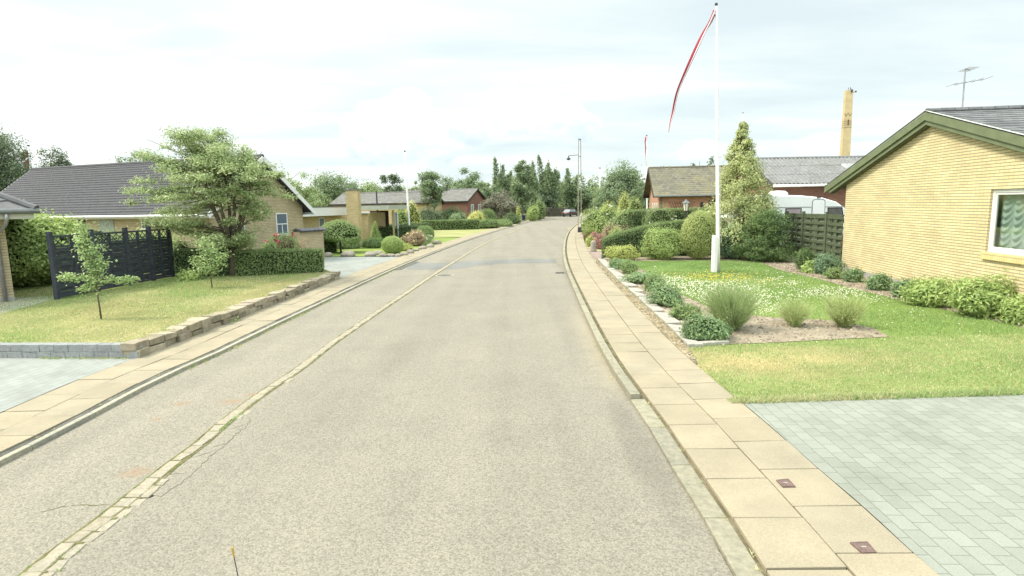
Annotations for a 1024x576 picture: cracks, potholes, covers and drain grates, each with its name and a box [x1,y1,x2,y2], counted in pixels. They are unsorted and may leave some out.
utility cover [850,541,876,554]
utility cover [776,479,796,488]
